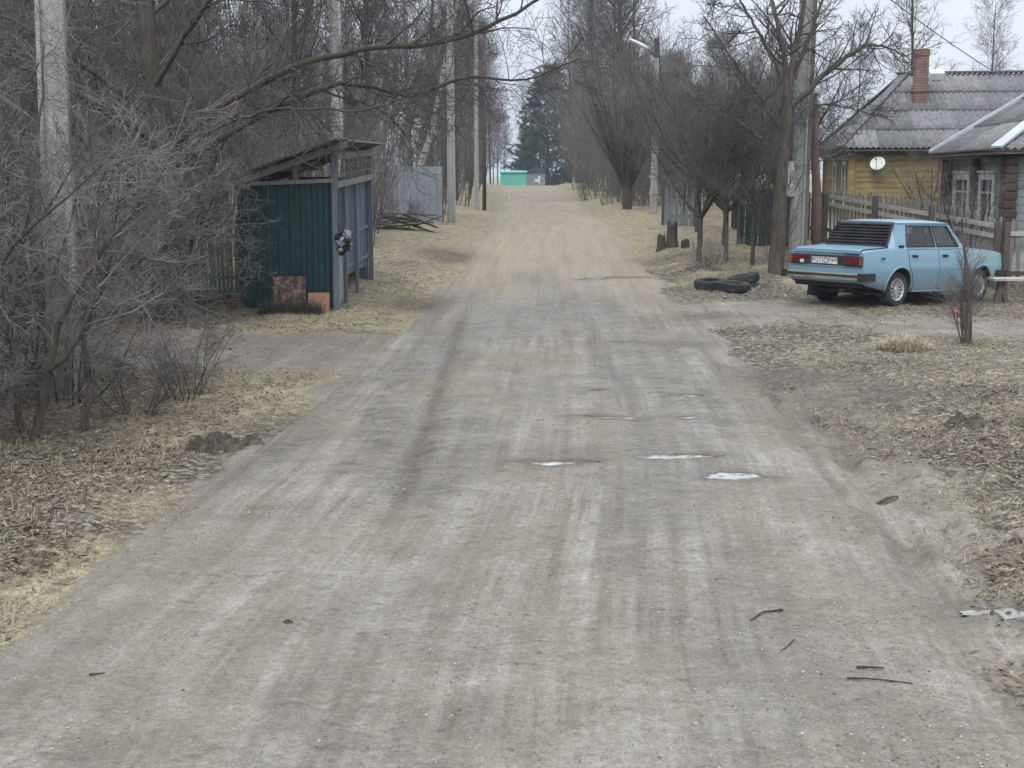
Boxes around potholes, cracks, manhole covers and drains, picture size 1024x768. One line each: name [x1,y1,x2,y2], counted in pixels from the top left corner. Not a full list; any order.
pothole [554,413,654,424]
pothole [479,454,621,470]
pothole [617,450,748,466]
pothole [676,466,791,486]
